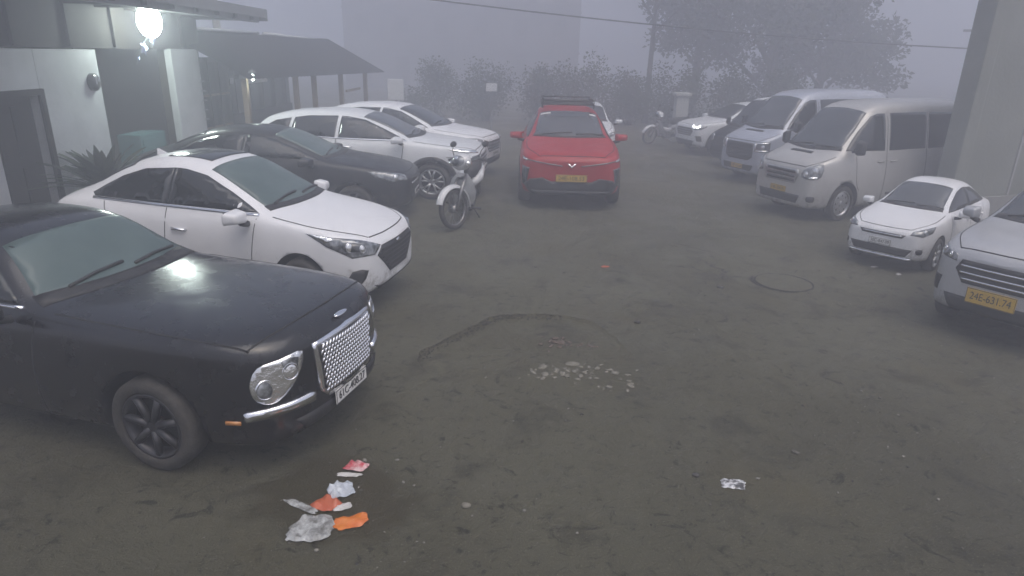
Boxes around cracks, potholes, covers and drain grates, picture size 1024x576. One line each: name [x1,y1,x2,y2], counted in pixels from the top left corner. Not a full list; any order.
manhole cover [749,273,814,293]
pothole [417,313,641,397]
